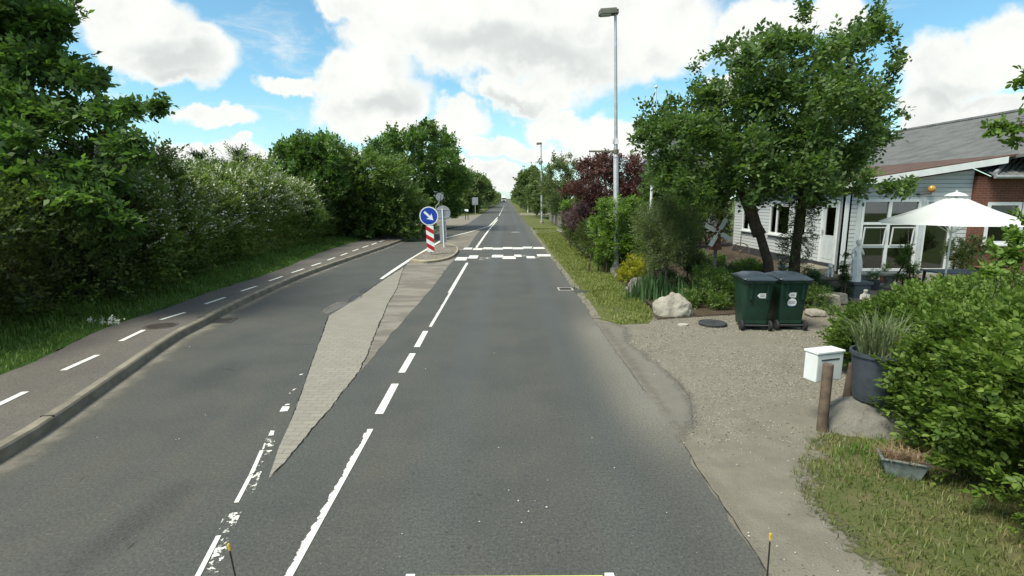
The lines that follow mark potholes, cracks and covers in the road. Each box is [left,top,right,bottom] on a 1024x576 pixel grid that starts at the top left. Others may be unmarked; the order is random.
manhole cover [698,319,727,328]
